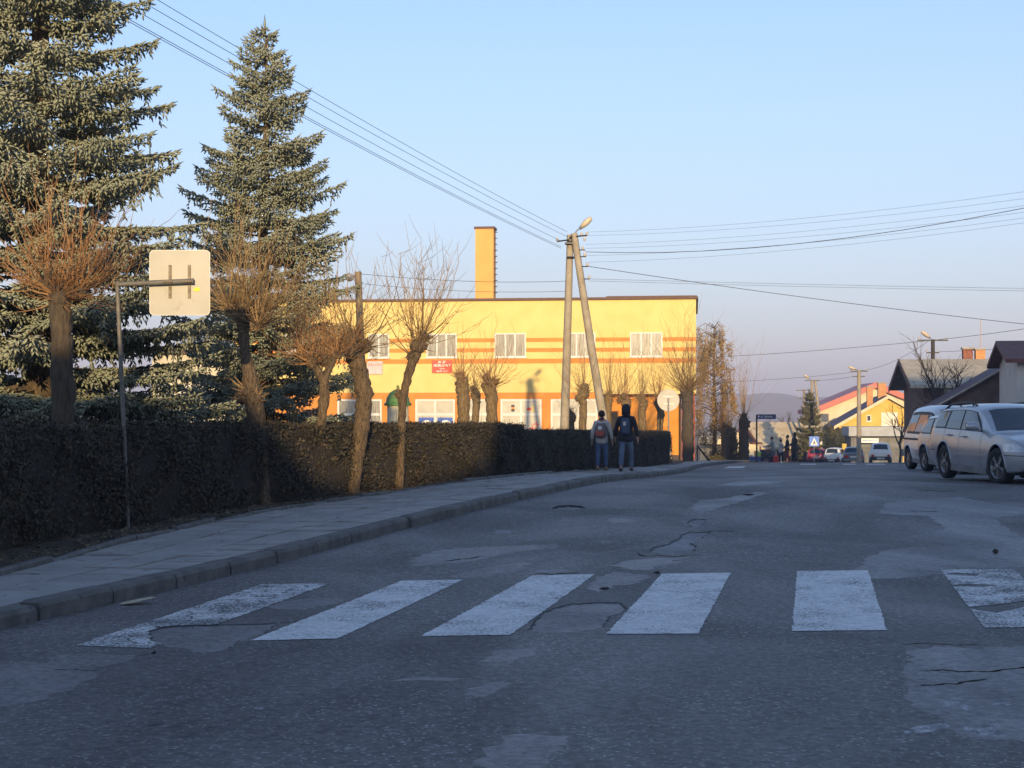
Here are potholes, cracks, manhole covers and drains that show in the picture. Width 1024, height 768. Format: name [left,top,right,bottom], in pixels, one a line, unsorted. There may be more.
pothole [528,602,627,633]
crack [919,667,1024,686]
